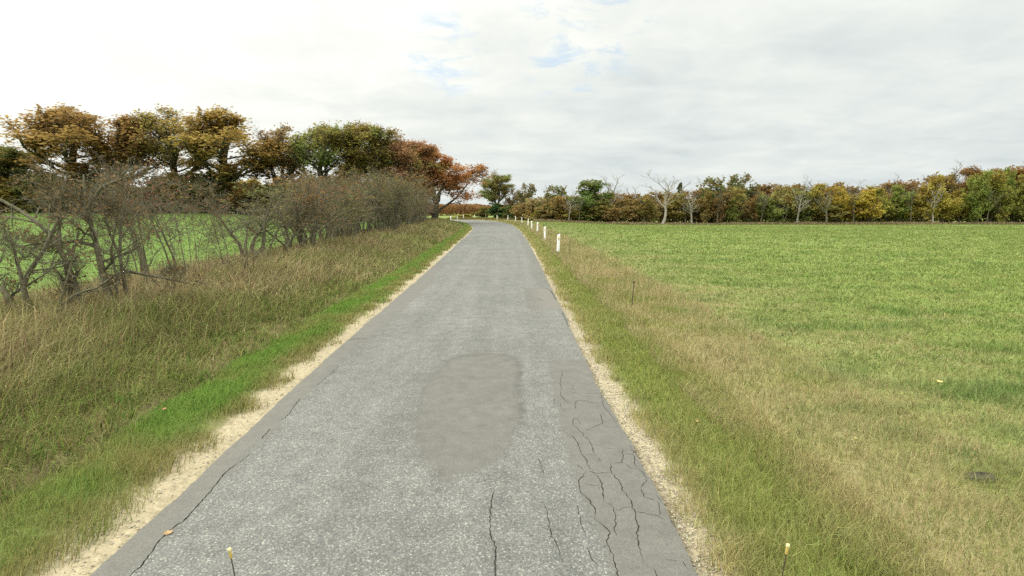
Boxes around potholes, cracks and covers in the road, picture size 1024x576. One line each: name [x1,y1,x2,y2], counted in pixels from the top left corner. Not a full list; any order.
crack [489,490,497,576]
crack [130,369,335,576]
crack [554,374,690,576]
